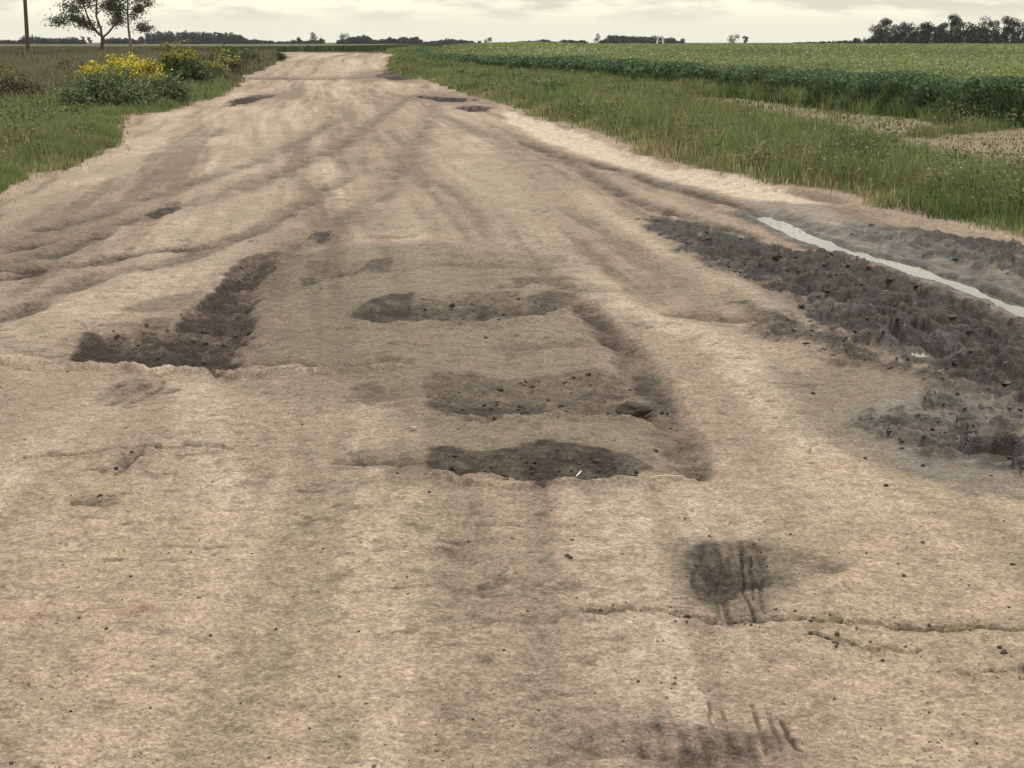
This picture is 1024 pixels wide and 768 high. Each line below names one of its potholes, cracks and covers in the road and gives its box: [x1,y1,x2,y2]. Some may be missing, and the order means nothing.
pothole [416,441,654,490]
pothole [223,94,277,106]
crack [18,443,237,459]
crack [575,603,1024,655]
pothole [64,252,284,378]
pothole [341,293,583,326]
pothole [678,546,789,610]
pothole [419,367,663,426]
pothole [310,232,338,244]
pothole [139,205,187,220]
pothole [300,260,399,279]
